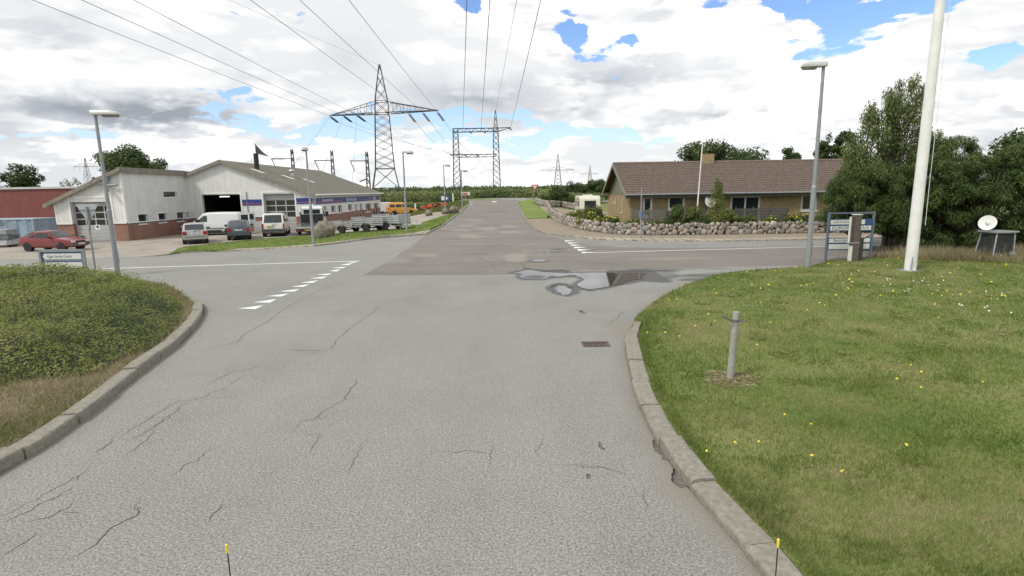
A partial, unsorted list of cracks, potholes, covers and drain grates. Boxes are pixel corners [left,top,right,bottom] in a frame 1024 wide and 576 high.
crack [3,364,263,555]
